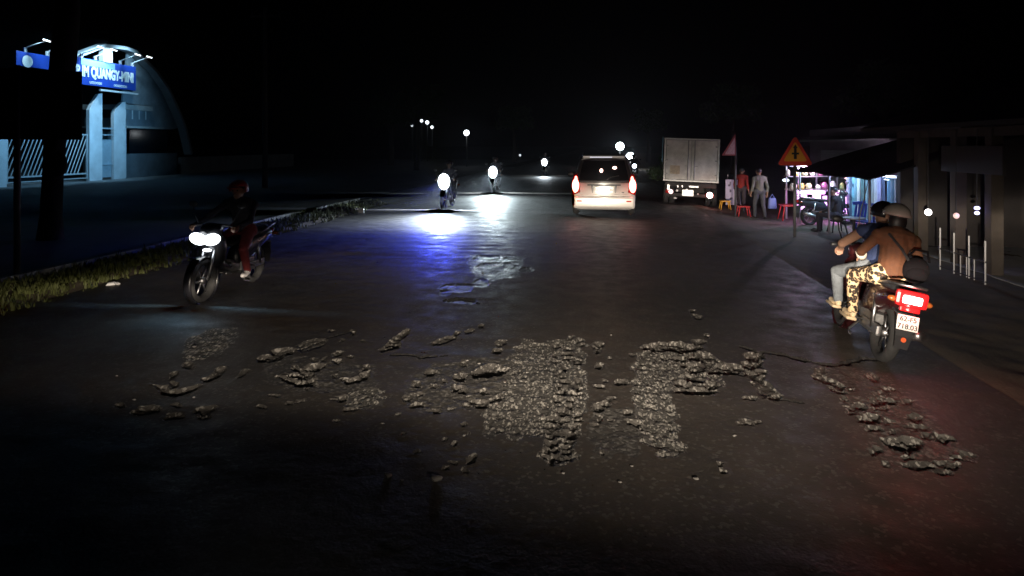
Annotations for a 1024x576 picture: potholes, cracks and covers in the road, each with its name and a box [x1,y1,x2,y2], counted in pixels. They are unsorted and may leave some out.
pothole [684,351,719,367]
pothole [865,444,885,457]
pothole [878,435,926,456]
pothole [863,372,882,383]
pothole [693,361,724,375]
pothole [472,278,491,287]
pothole [918,432,935,442]
pothole [560,444,574,456]
pothole [269,347,298,360]
pothole [932,431,957,446]
pothole [544,430,560,441]
